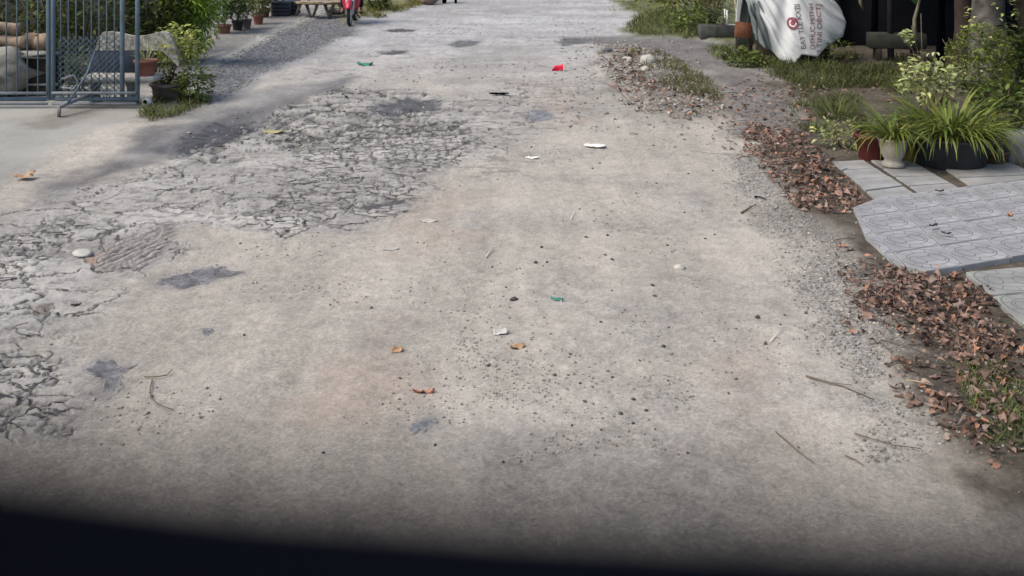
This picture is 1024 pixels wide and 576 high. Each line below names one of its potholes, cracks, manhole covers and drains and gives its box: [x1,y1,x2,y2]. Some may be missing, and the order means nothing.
crack [0,77,628,436]
